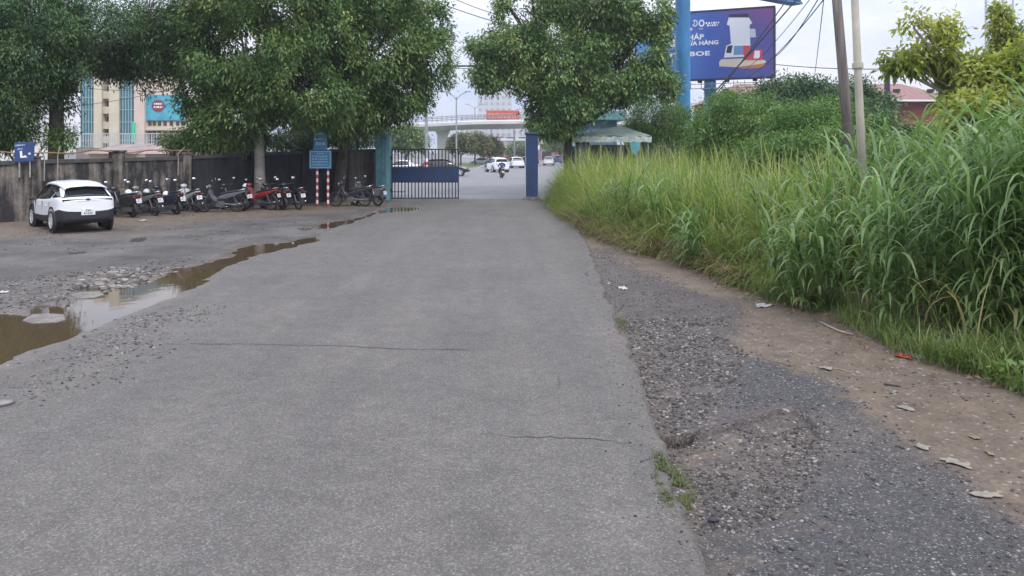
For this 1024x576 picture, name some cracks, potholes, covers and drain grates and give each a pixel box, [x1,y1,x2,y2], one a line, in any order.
crack [494,434,630,444]
pothole [64,284,110,294]
pothole [660,405,837,489]
pothole [19,303,66,317]
